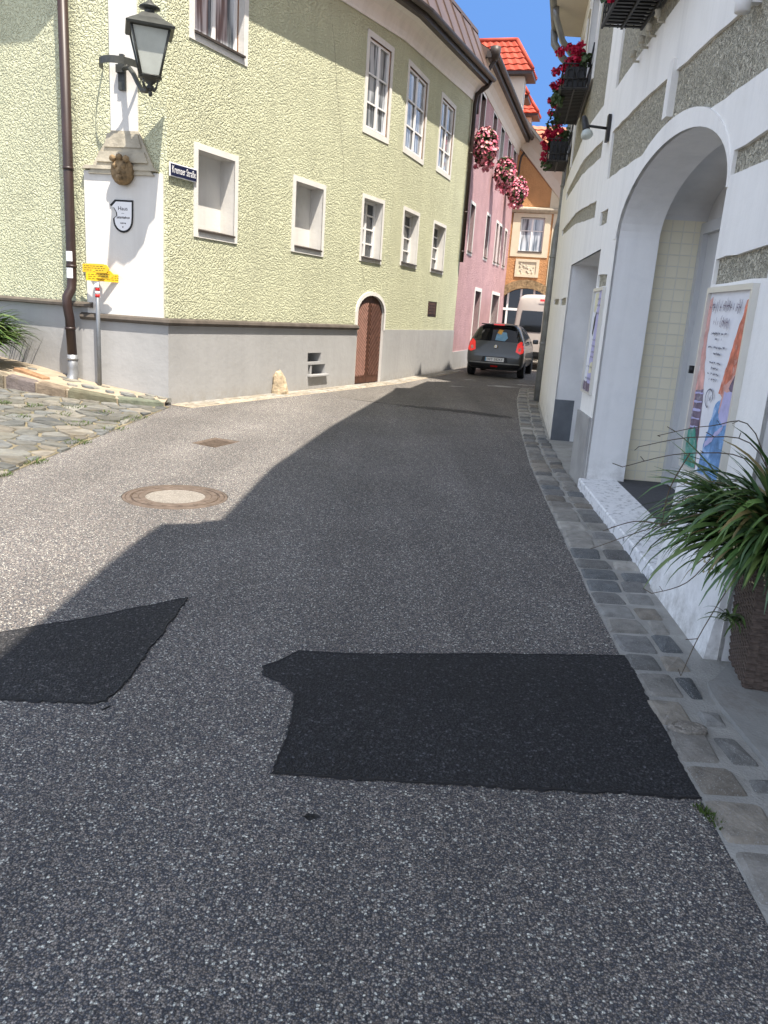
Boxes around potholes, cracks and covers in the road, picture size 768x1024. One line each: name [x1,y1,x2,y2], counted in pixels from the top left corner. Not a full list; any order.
manhole cover [121,485,228,510]
